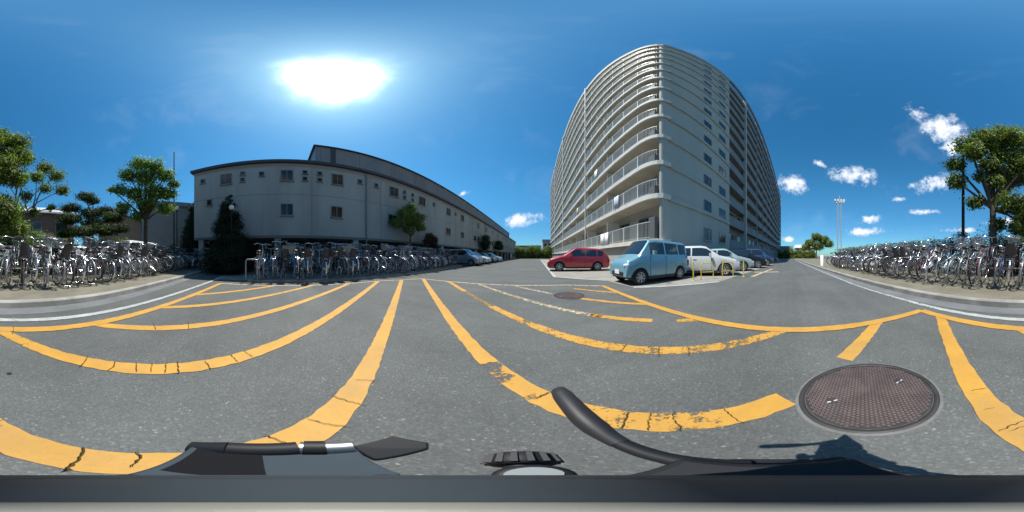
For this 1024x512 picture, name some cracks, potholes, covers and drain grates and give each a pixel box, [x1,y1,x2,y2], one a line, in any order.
manhole cover [553,292,585,300]
crack [65,447,85,472]
manhole cover [795,363,944,436]
